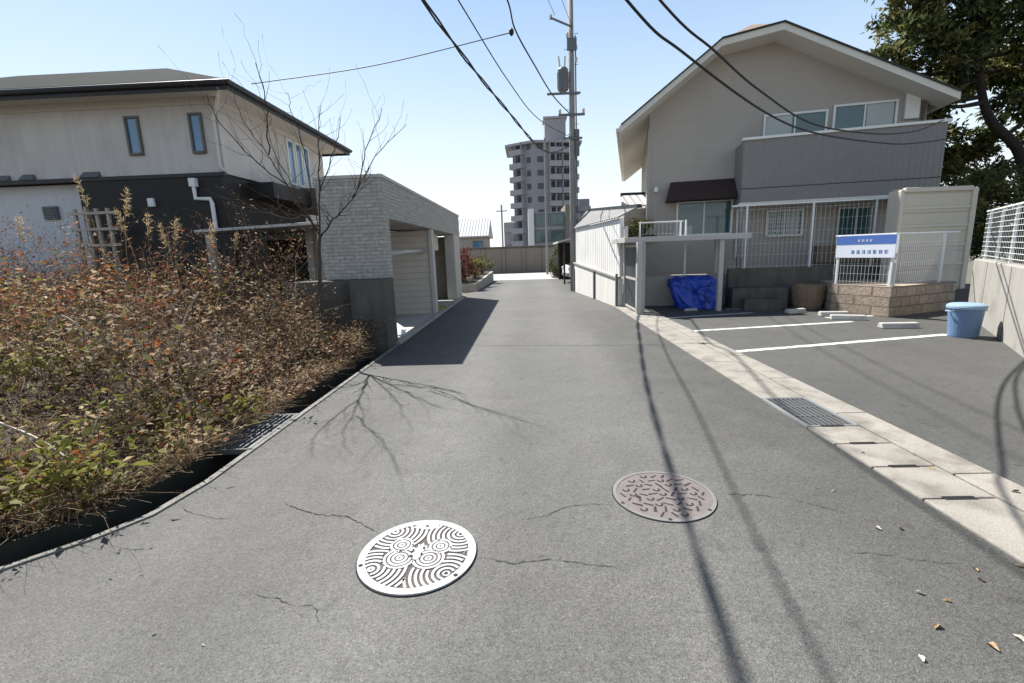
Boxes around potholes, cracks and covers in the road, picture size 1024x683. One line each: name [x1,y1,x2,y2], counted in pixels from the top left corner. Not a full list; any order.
crack [483,553,615,567]
manhole cover [612,471,718,523]
crack [286,504,378,533]
drain grate [208,413,299,455]
drain grate [762,397,858,428]
manhole cover [355,520,478,598]
